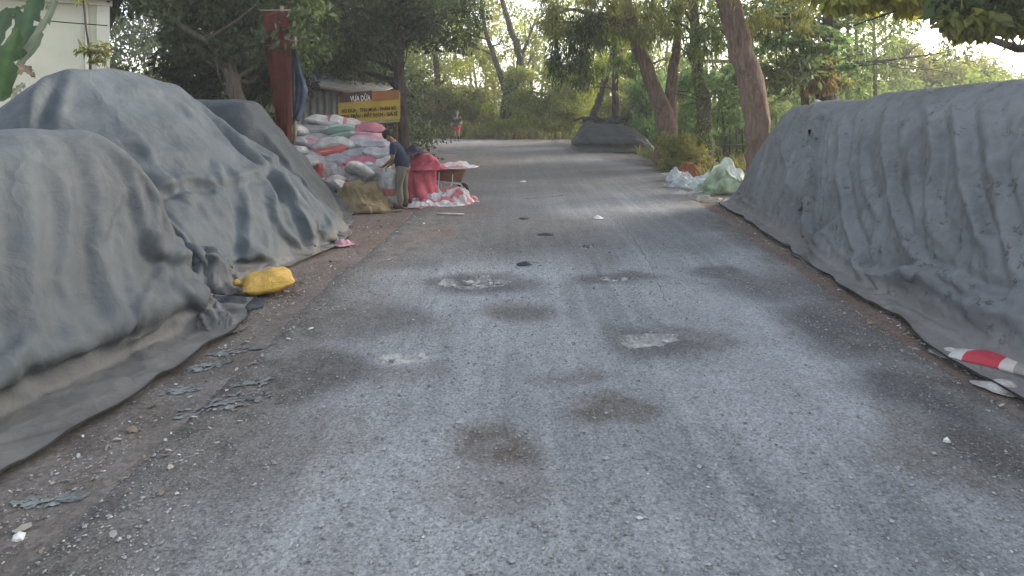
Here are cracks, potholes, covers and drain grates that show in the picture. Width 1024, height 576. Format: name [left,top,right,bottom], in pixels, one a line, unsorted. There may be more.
pothole [378,352,433,365]
pothole [436,274,513,290]
pothole [619,333,679,349]
